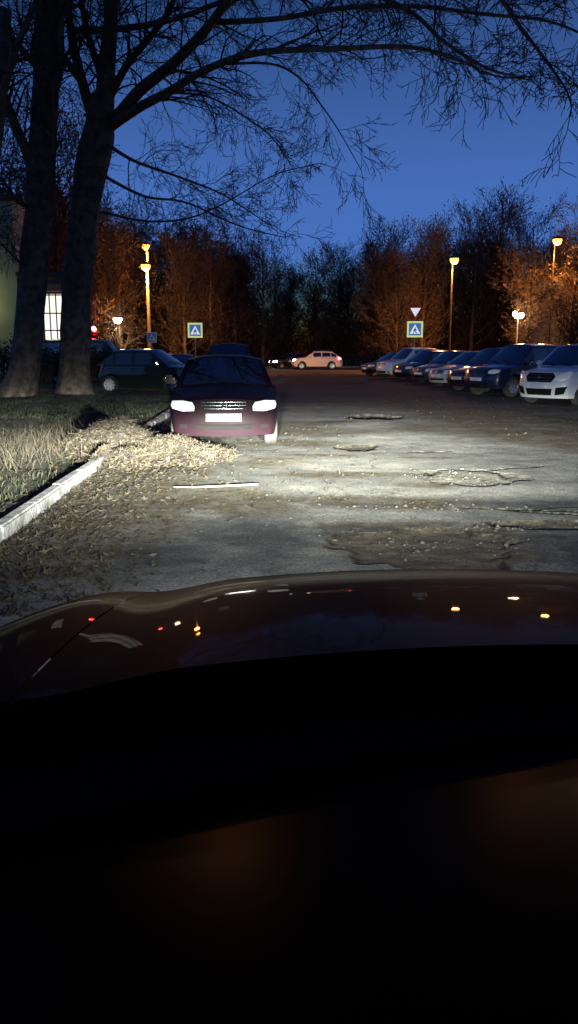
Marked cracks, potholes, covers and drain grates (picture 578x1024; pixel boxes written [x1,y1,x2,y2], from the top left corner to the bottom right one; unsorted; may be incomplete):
pothole [322,527,525,570]
pothole [411,469,533,487]
pothole [333,444,379,452]
